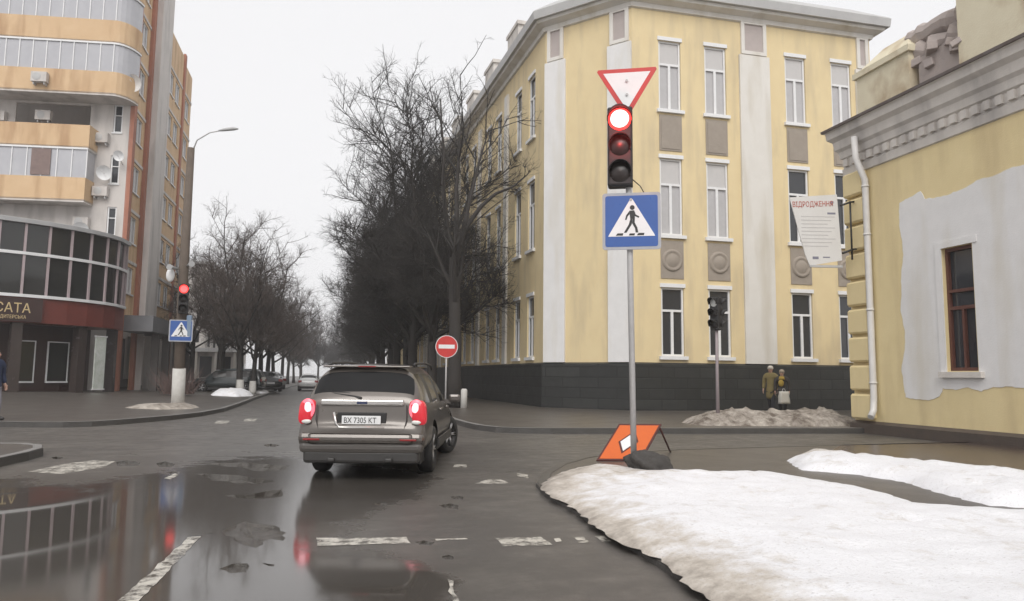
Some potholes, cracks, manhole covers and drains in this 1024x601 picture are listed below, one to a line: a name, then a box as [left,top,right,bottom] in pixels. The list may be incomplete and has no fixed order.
pothole [222,521,286,548]
pothole [220,563,249,573]
pothole [226,489,283,499]
